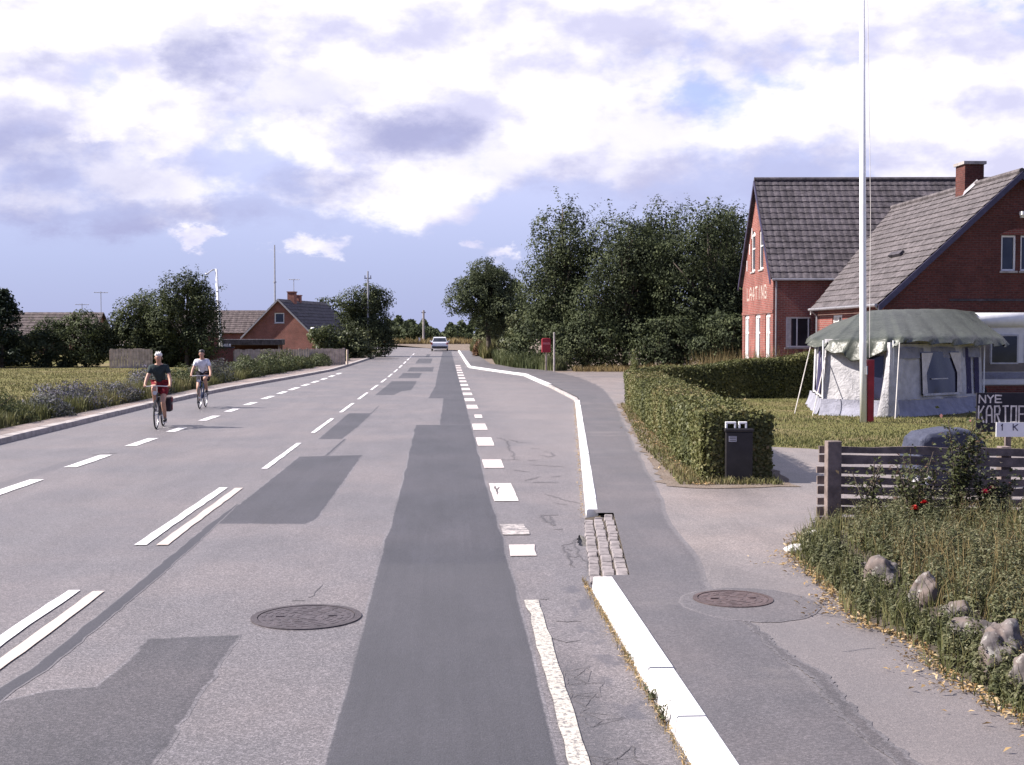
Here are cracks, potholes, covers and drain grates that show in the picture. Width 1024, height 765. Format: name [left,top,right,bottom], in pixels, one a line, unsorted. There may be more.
manhole cover [693,590,774,608]
crack [494,438,589,574]
manhole cover [250,604,362,630]
